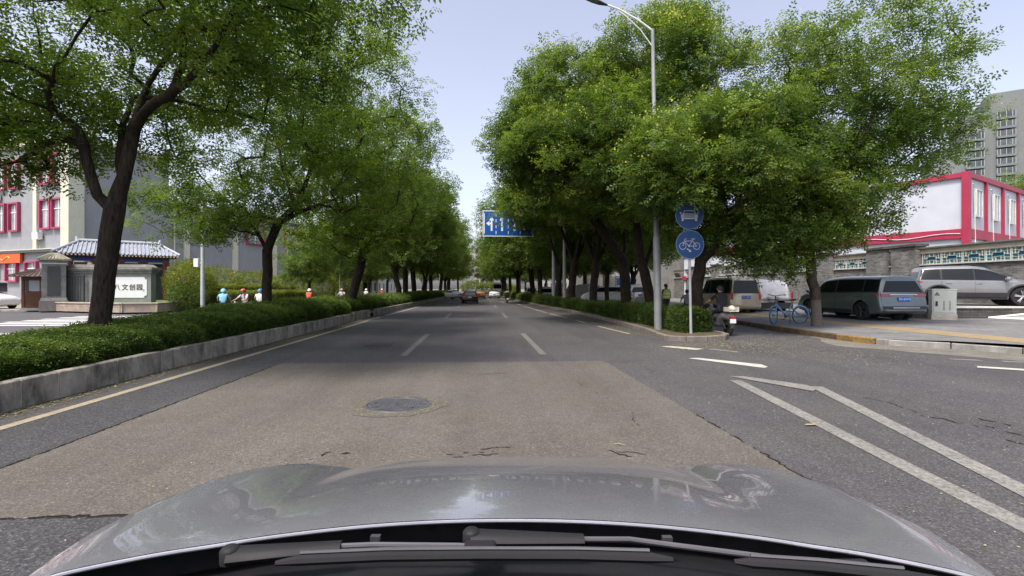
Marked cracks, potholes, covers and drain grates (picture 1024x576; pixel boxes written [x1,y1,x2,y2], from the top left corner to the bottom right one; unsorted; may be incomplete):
crack [446,447,509,457]
crack [863,397,1022,444]
manhole cover [364,397,431,413]
